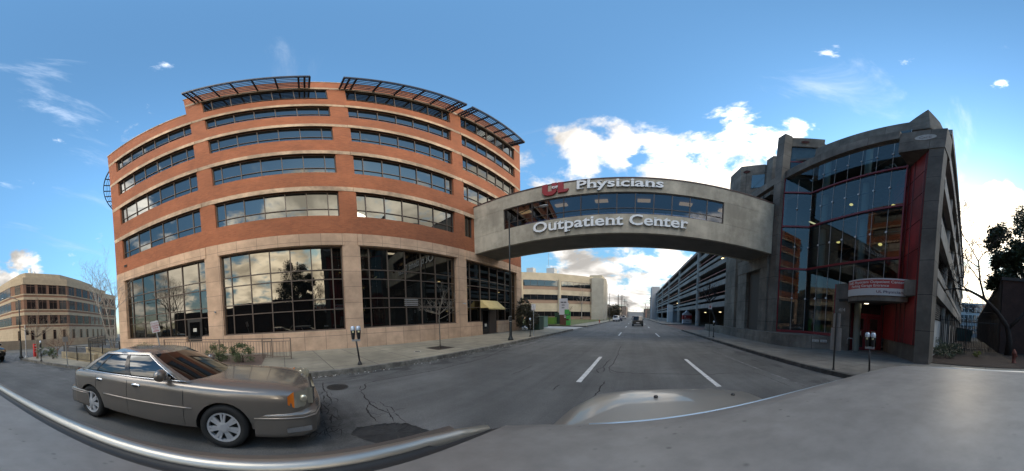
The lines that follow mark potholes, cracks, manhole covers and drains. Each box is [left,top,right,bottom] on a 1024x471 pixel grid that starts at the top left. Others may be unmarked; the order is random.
crack [309,383,345,438]
